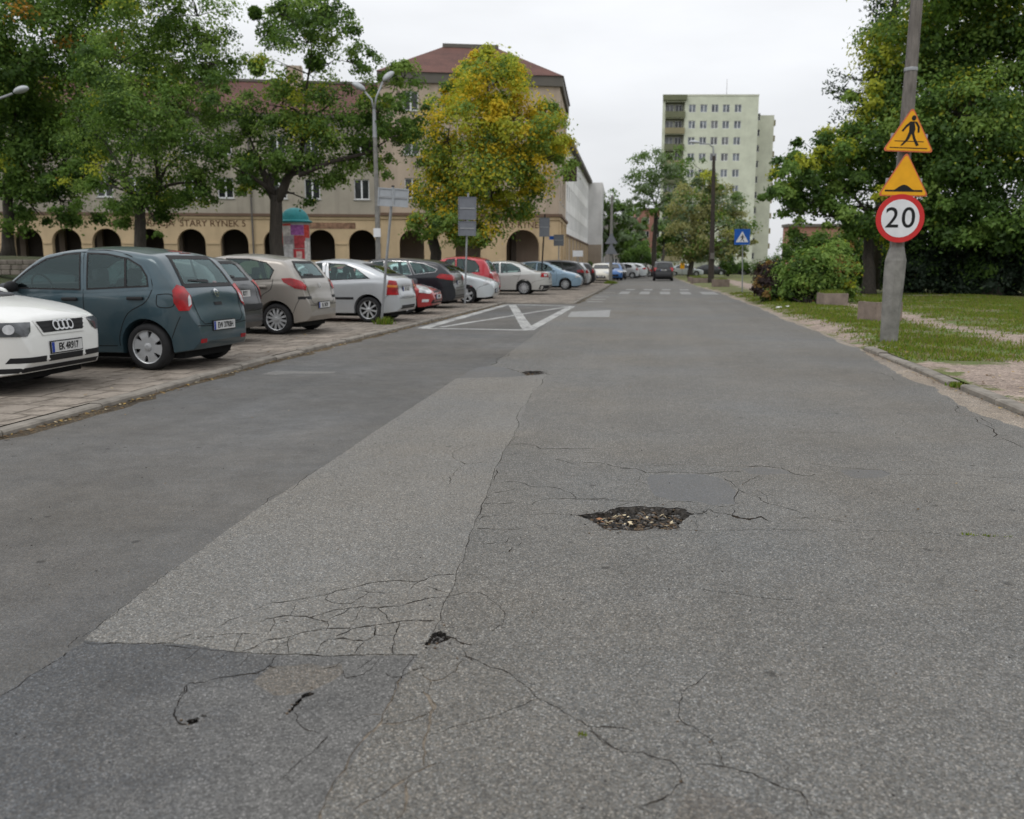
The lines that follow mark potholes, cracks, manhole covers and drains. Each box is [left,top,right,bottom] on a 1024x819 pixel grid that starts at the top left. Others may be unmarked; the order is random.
crack [509,436,889,529]
crack [173,574,831,819]
pothole [575,506,693,531]
crack [0,468,319,696]
pothole [425,631,451,646]
